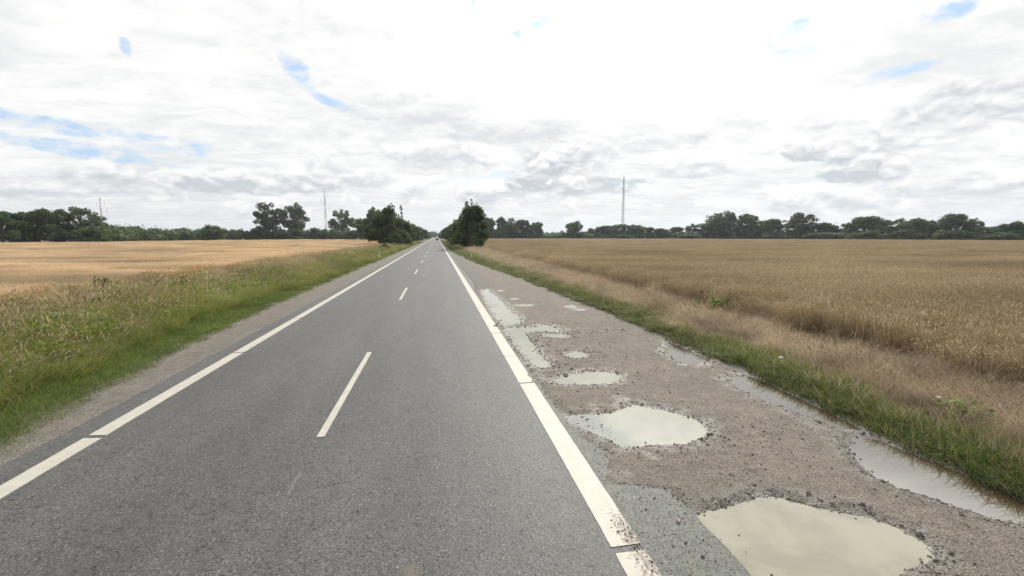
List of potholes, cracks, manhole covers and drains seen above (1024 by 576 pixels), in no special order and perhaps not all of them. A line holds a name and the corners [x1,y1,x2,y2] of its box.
pothole [695,493,941,576]
pothole [482,289,525,326]
pothole [505,324,564,368]
pothole [563,404,711,449]
pothole [550,371,623,385]
